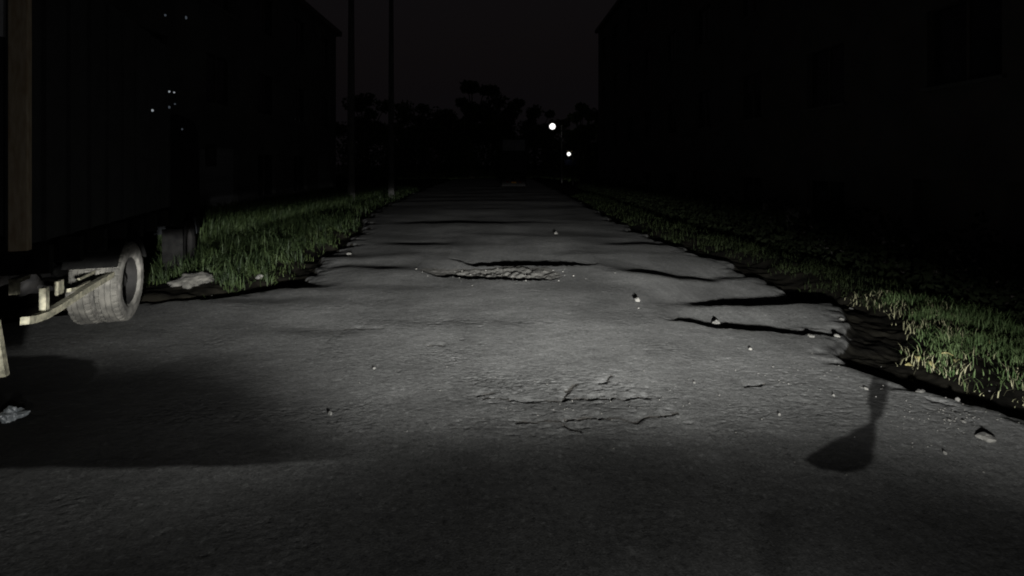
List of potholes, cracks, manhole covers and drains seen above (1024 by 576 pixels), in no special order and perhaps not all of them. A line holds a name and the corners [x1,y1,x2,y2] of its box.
pothole [420,266,562,281]
crack [478,375,680,433]
